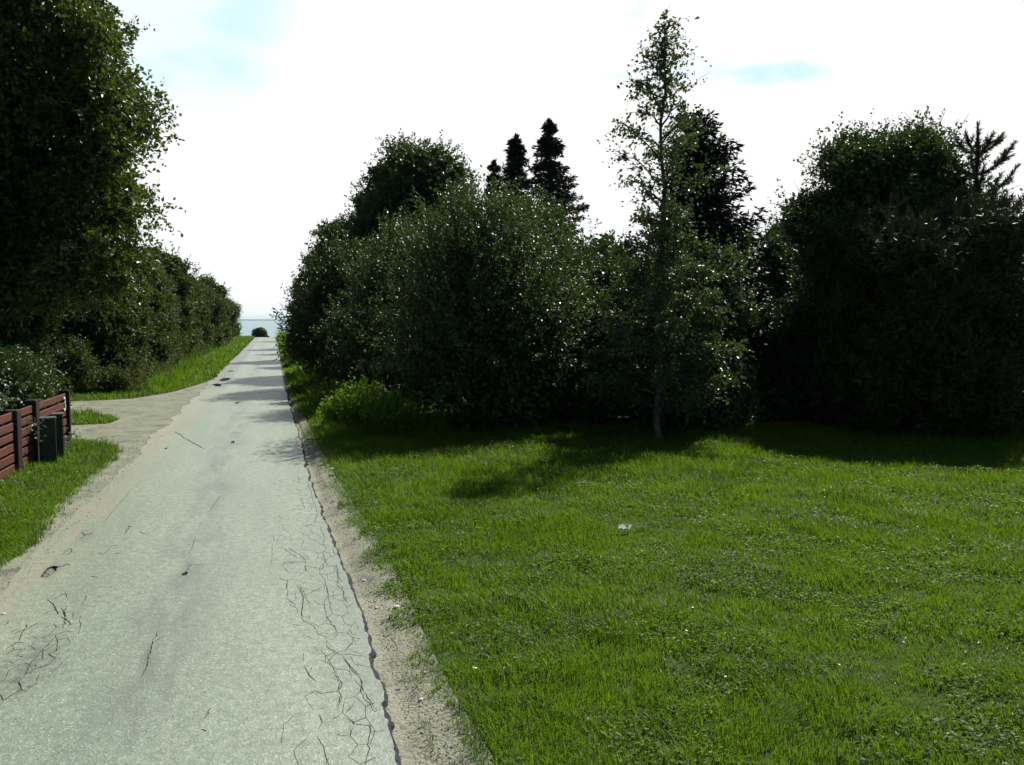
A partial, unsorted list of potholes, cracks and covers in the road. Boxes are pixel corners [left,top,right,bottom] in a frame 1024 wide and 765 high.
pothole [41,566,58,578]
crack [271,476,380,765]
crack [58,489,144,567]
crack [141,633,163,678]
crack [0,593,86,704]
